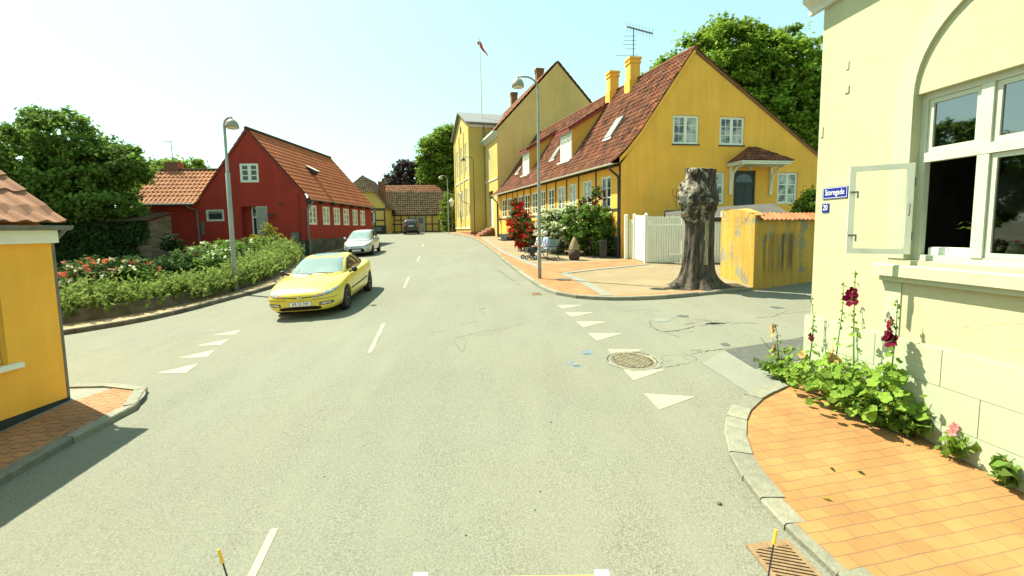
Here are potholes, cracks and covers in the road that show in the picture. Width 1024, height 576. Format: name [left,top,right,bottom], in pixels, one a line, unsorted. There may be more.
drain grate [745,539,822,576]
manhole cover [606,351,662,371]
crack [650,311,806,333]
